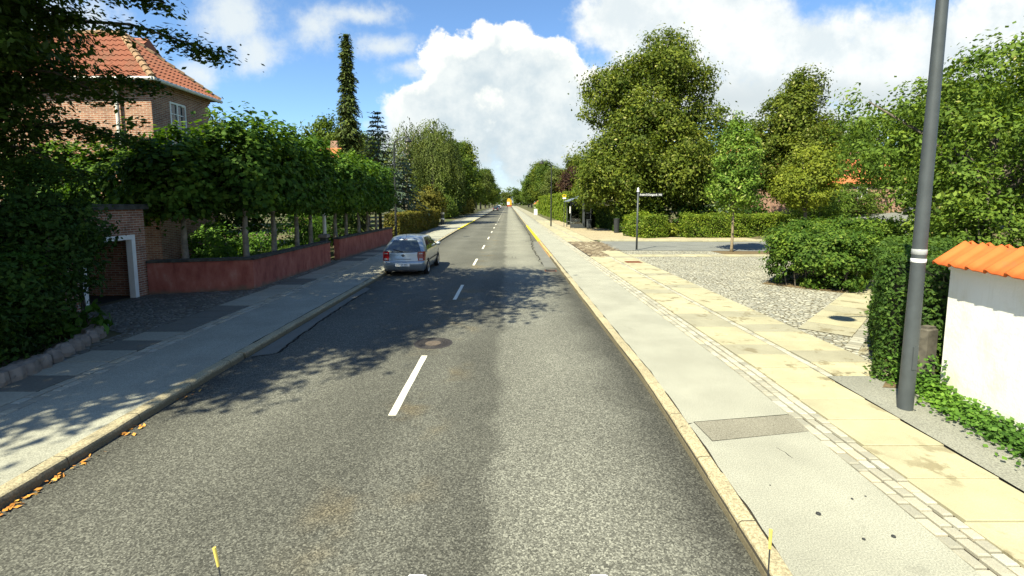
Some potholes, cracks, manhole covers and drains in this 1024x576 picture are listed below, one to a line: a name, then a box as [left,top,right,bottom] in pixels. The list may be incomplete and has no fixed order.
manhole cover [414,338,452,349]
